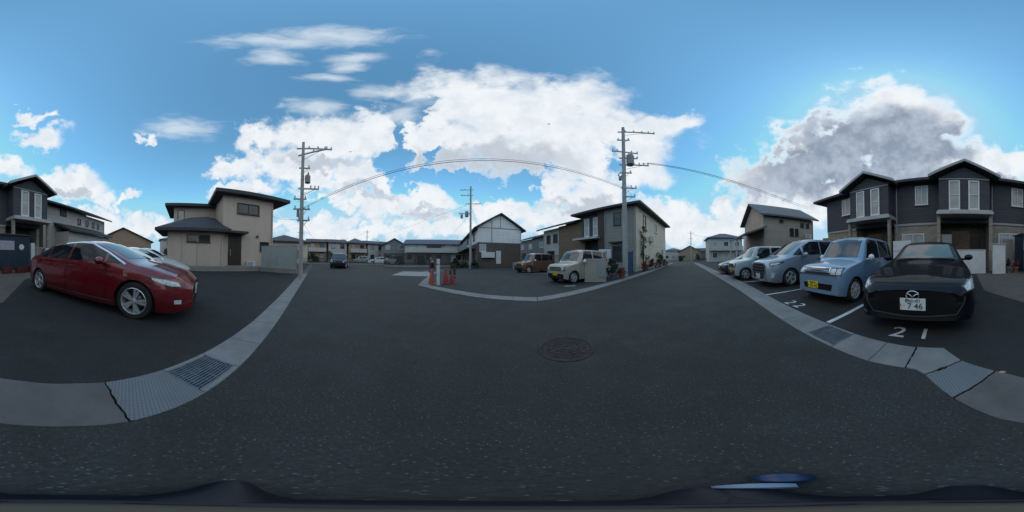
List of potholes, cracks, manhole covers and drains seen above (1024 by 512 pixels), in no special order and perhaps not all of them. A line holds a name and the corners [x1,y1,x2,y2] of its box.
drain grate [808,325,853,345]
drain grate [166,355,235,391]
manhole cover [538,337,595,362]
